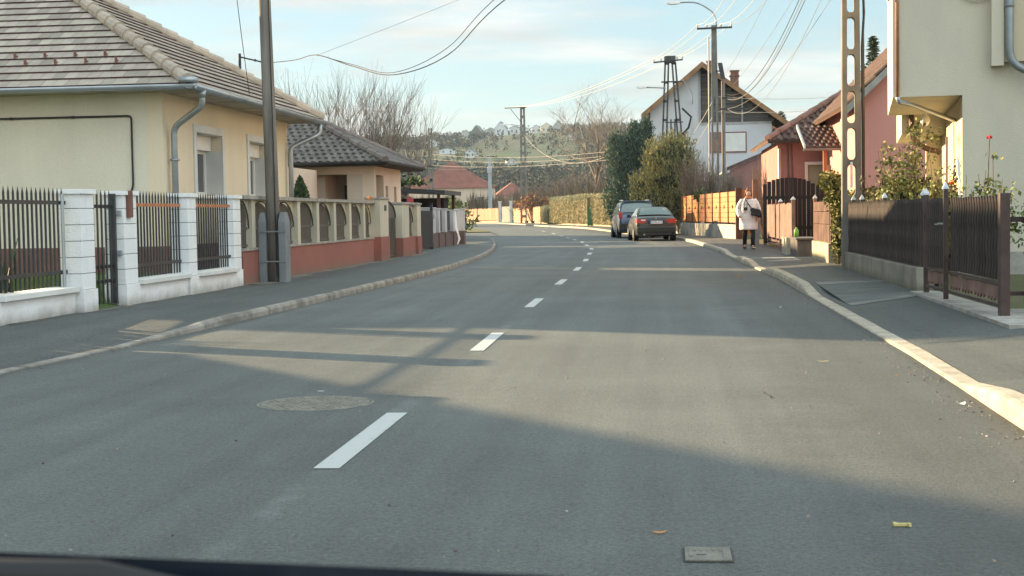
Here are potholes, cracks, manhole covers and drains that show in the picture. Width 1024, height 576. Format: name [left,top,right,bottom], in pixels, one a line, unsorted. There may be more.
utility cover [683,547,734,563]
manhole cover [256,396,375,411]
